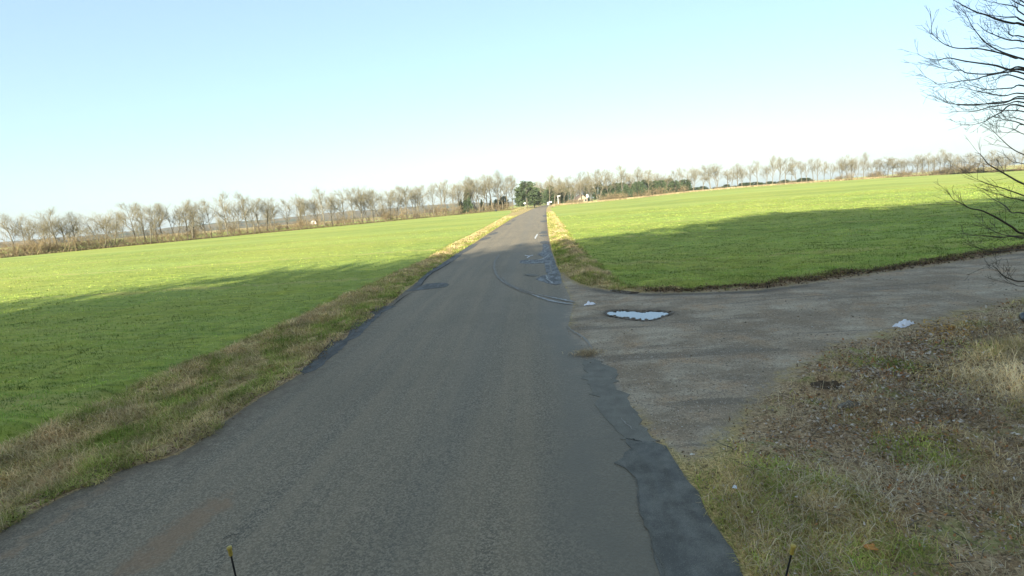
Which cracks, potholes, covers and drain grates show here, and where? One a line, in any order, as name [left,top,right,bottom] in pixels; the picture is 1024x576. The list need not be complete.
pothole [603,309,674,322]
